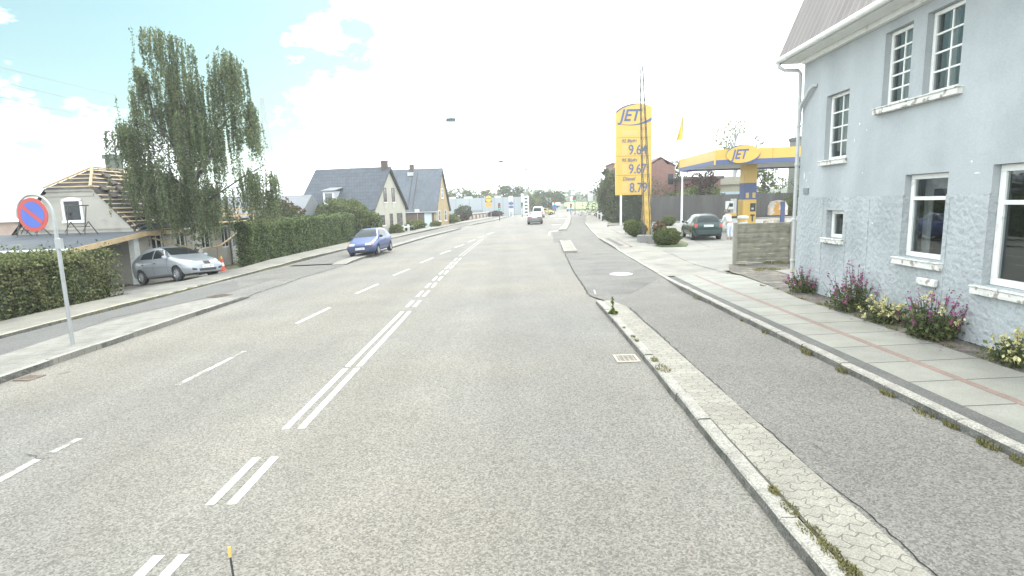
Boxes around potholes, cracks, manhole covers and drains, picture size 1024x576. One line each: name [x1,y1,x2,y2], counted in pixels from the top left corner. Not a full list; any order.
drain grate [612,354,641,363]
